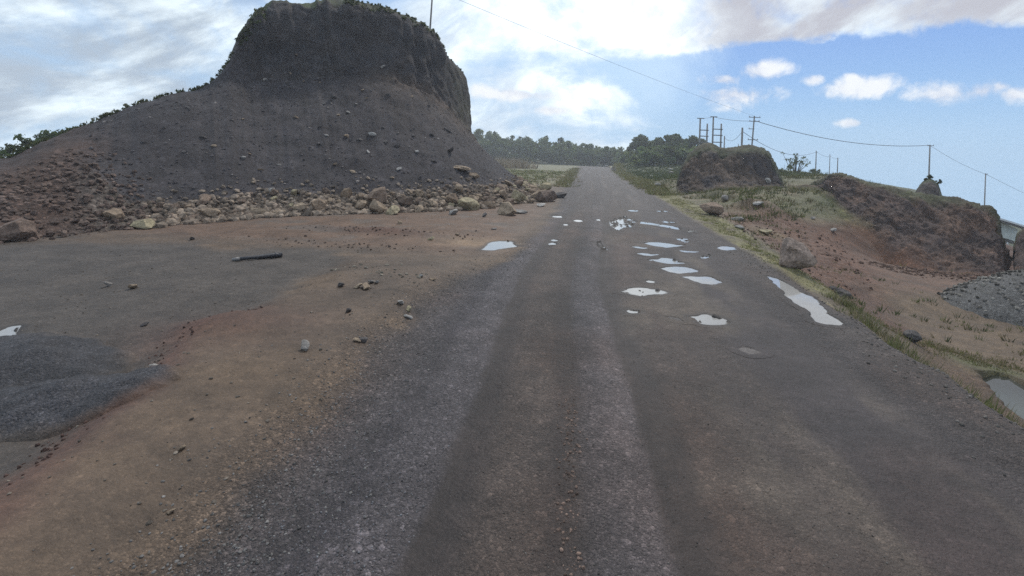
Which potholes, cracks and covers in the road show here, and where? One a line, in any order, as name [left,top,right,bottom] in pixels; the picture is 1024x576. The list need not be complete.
pothole [0,322,38,336]
pothole [679,311,742,329]
pothole [654,265,707,275]
pothole [613,285,677,299]
pothole [725,342,775,359]
pothole [475,240,524,252]
pothole [638,241,691,249]
